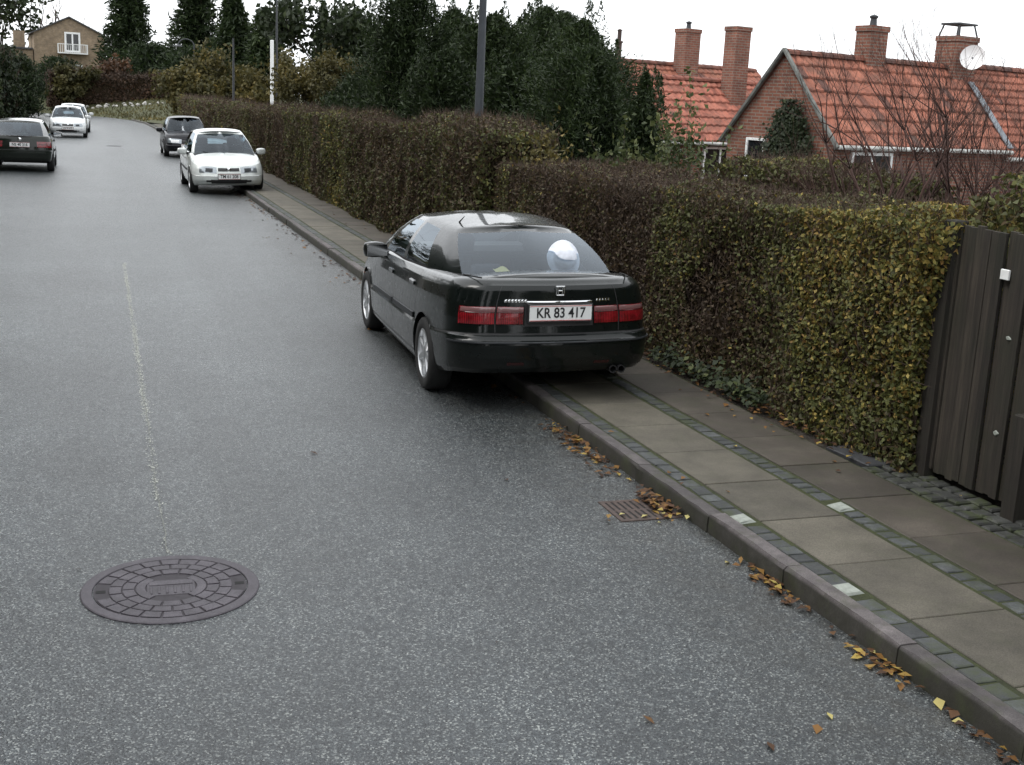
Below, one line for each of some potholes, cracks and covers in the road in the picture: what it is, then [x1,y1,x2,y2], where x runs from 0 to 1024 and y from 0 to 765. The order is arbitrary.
manhole cover [80,555,259,625]
drain grate [598,498,683,522]
